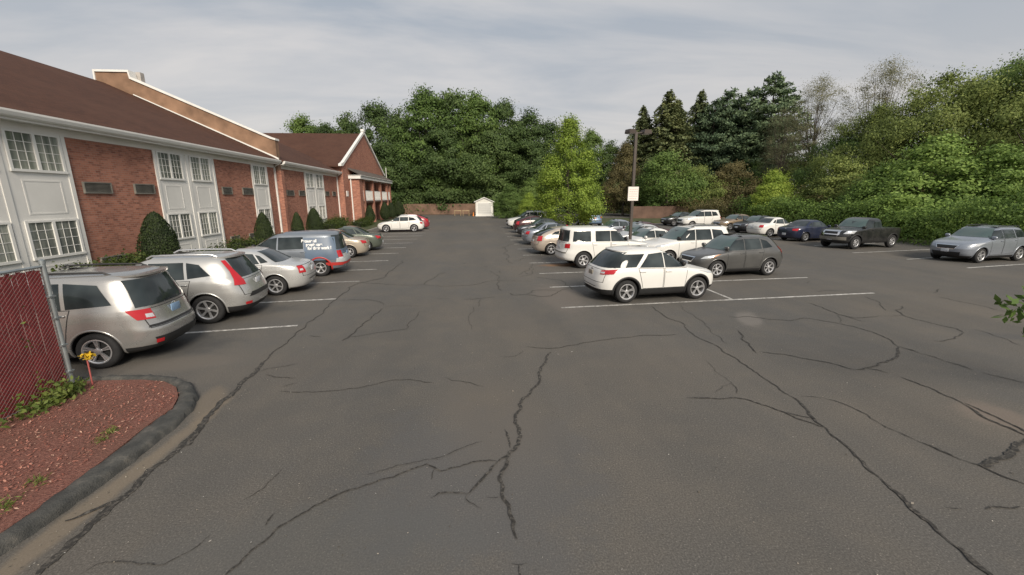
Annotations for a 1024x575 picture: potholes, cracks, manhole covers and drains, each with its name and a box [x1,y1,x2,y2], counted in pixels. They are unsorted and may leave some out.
crack [809,396,1024,483]
crack [285,379,480,392]
crack [342,243,572,341]
crack [684,282,1022,382]
crack [89,470,281,569]
